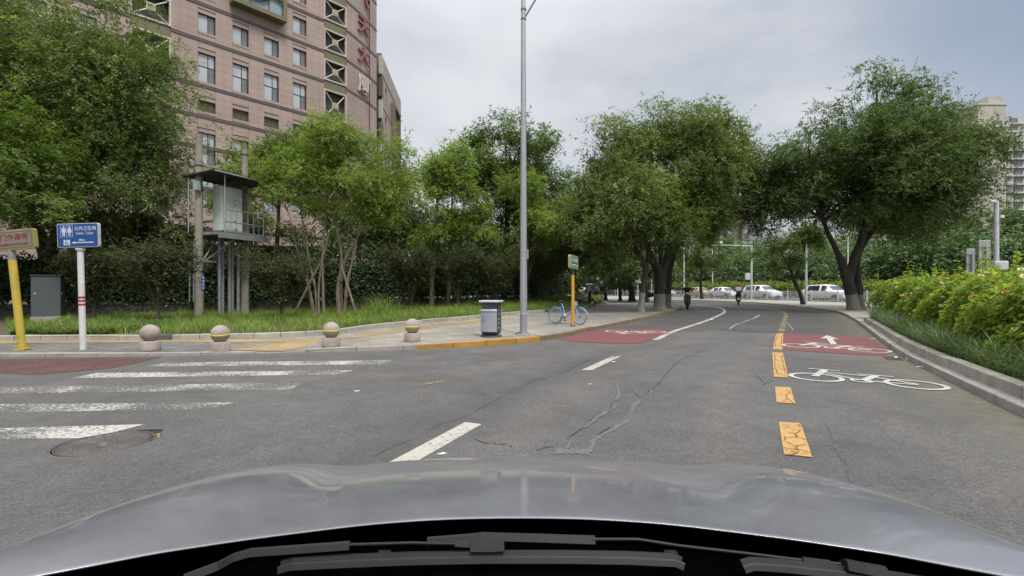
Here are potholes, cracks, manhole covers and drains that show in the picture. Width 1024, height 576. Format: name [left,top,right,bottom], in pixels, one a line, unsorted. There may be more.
manhole cover [47,431,156,457]
crack [475,354,695,455]
